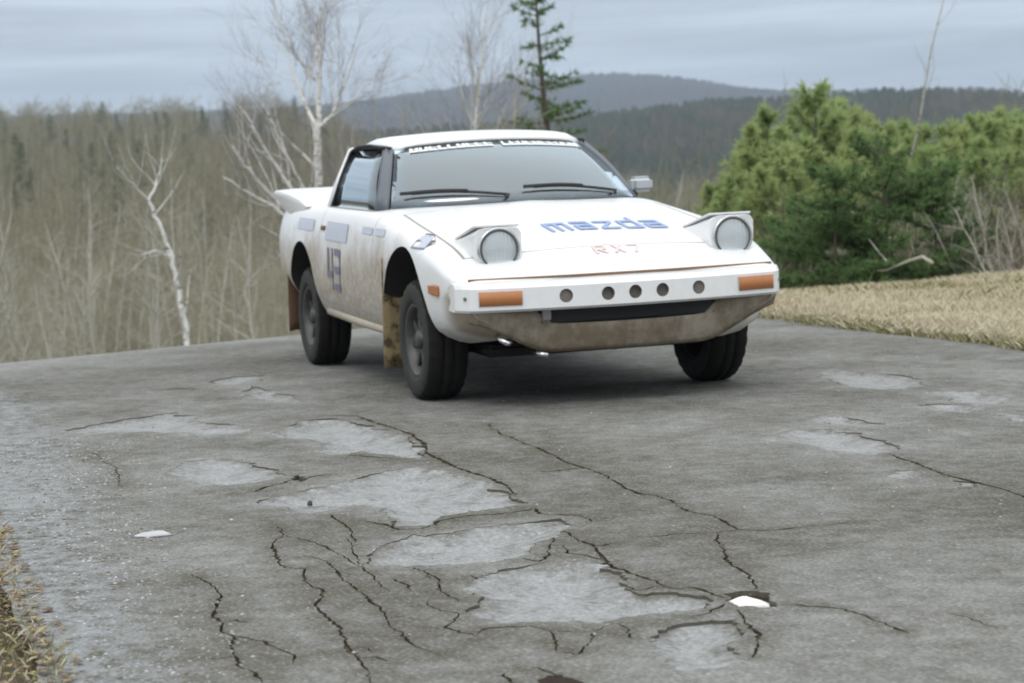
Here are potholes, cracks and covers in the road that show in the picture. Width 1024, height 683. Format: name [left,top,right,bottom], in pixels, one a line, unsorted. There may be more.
crack [190,415,863,683]
pothole [271,418,428,459]
pothole [255,467,530,528]
pothole [814,370,924,389]
crack [785,604,910,634]
pothole [920,403,976,412]
pothole [366,518,572,567]
pothole [162,459,286,486]
pothole [927,390,1013,405]
pothole [776,429,902,454]
pothole [461,561,713,623]
pothole [209,375,265,385]
